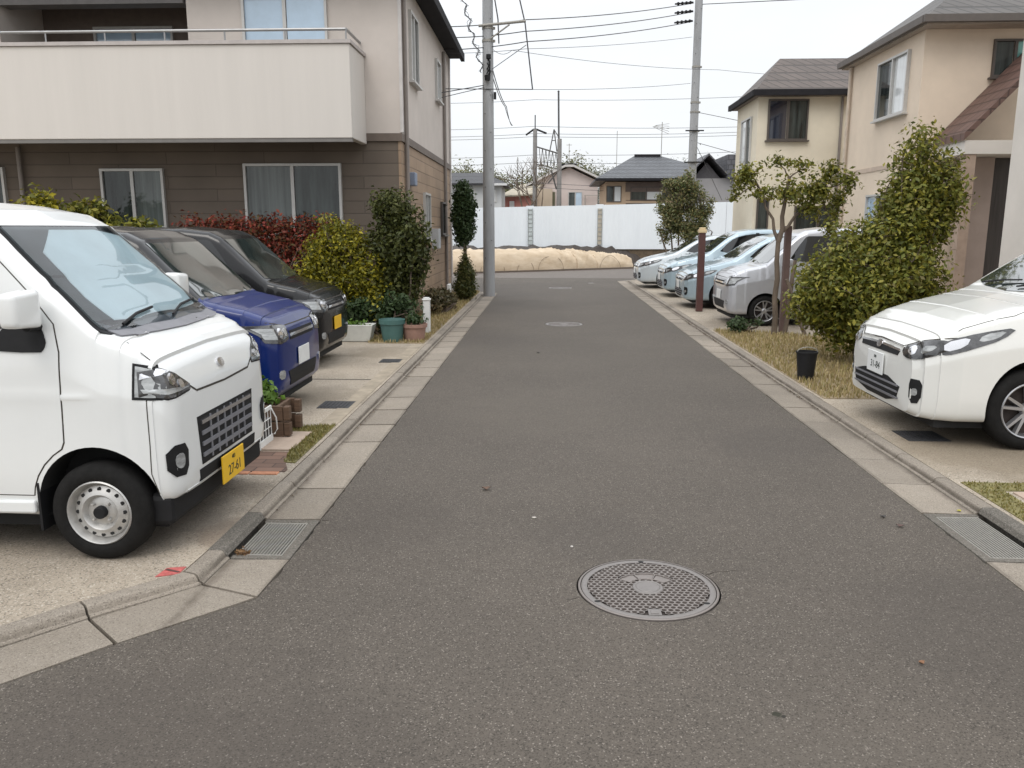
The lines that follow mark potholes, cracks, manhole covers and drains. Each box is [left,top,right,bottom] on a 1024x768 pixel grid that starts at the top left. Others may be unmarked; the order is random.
drain grate [208,512,320,561]
manhole cover [578,559,720,622]
drain grate [923,507,1024,564]
